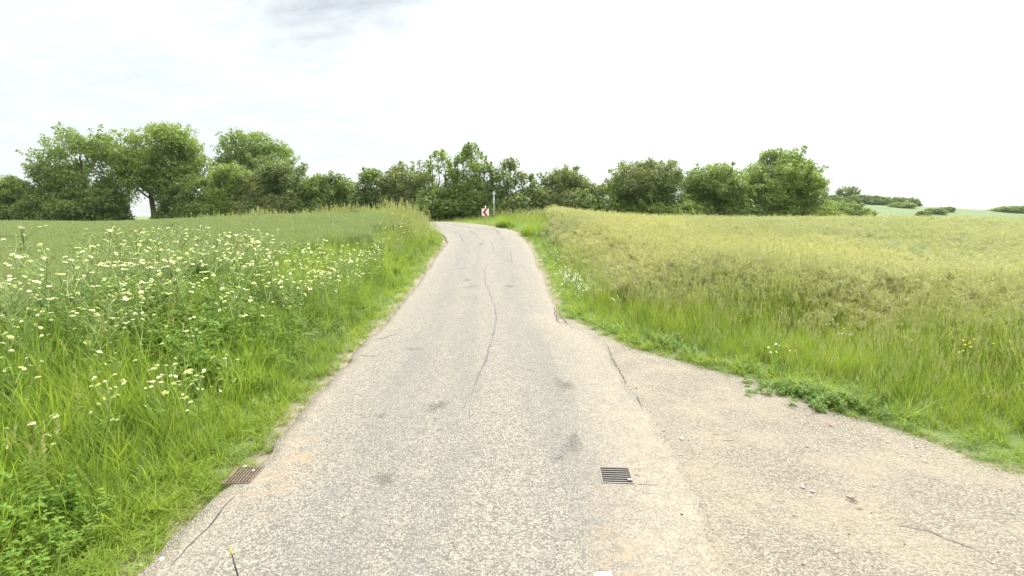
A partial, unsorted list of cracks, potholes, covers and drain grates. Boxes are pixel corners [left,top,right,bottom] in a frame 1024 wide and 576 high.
crack [899,524,998,558]
drain grate [221,466,265,488]
crack [170,488,240,568]
drain grate [598,466,635,484]
crack [449,224,520,423]
